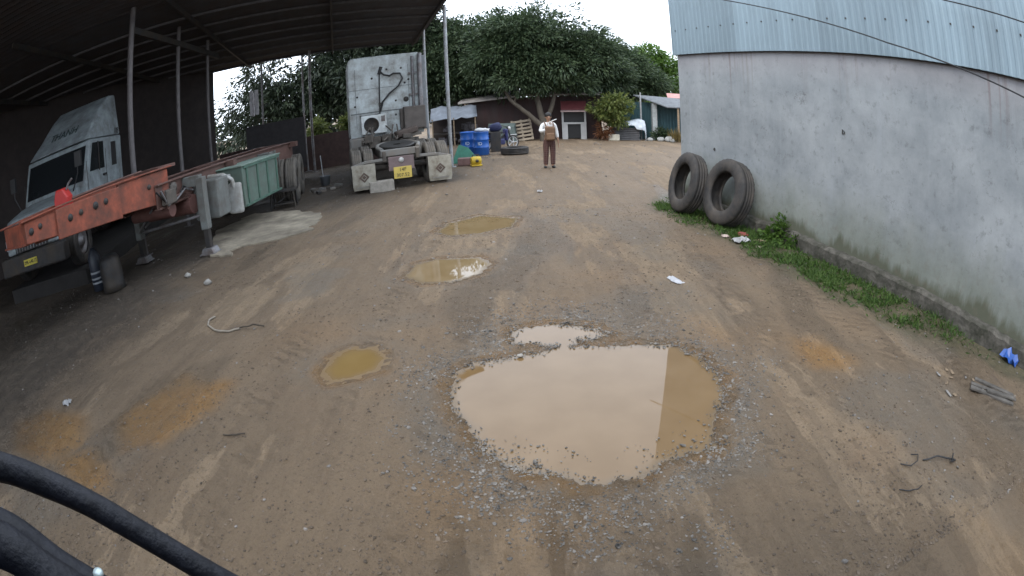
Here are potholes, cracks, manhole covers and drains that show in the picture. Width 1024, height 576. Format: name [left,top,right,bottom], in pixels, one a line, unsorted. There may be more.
pothole [310,342,399,389]
pothole [393,254,502,287]
pothole [432,317,741,502]
pothole [428,213,526,238]
